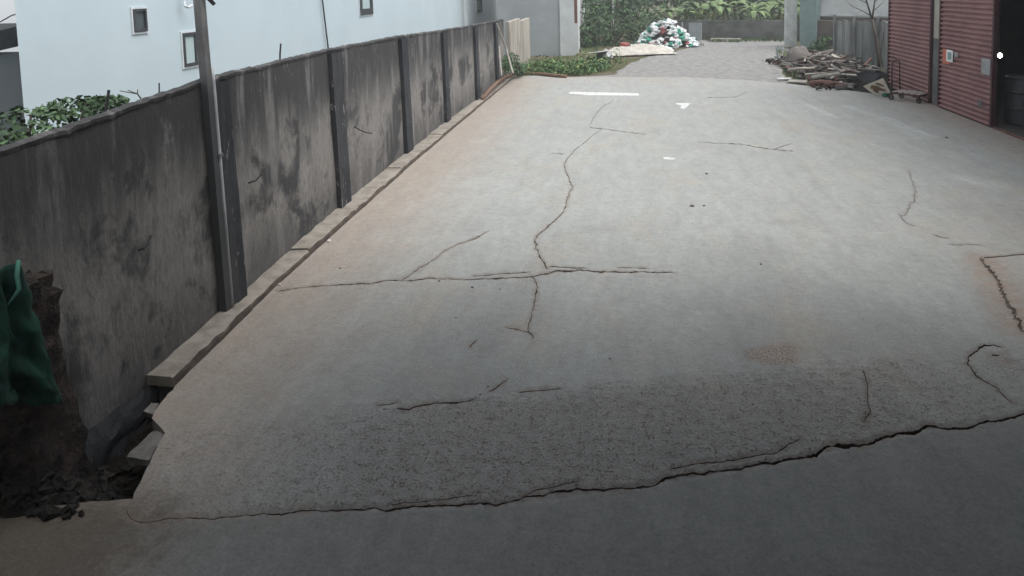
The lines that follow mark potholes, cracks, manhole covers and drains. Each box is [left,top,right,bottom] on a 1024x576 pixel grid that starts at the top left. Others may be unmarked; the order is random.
crack [127,244,1024,523]
crack [280,100,672,337]
